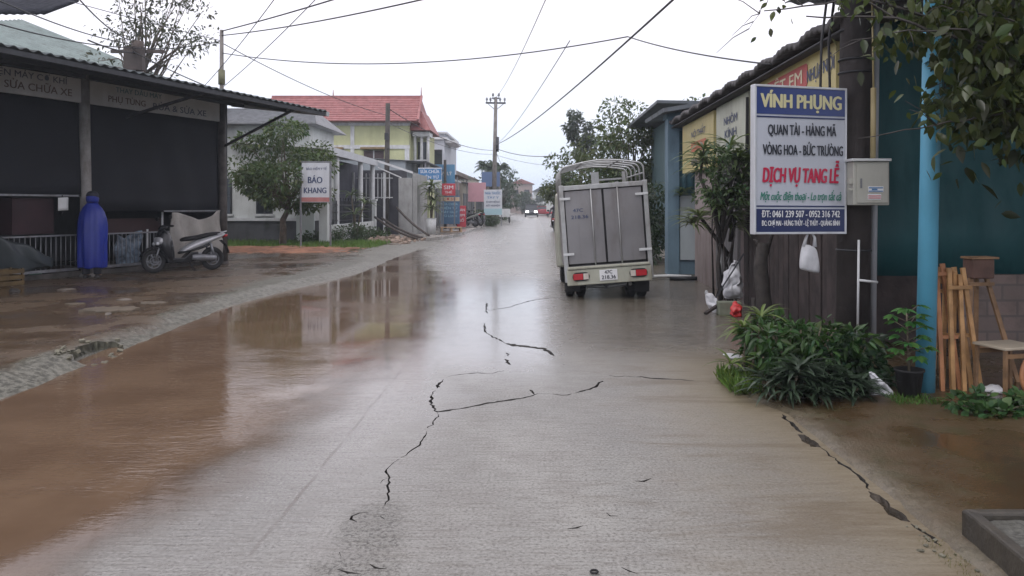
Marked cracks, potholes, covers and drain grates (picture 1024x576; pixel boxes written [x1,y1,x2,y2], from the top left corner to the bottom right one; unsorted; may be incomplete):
crack [338,297,692,574]
pothole [67,341,124,360]
